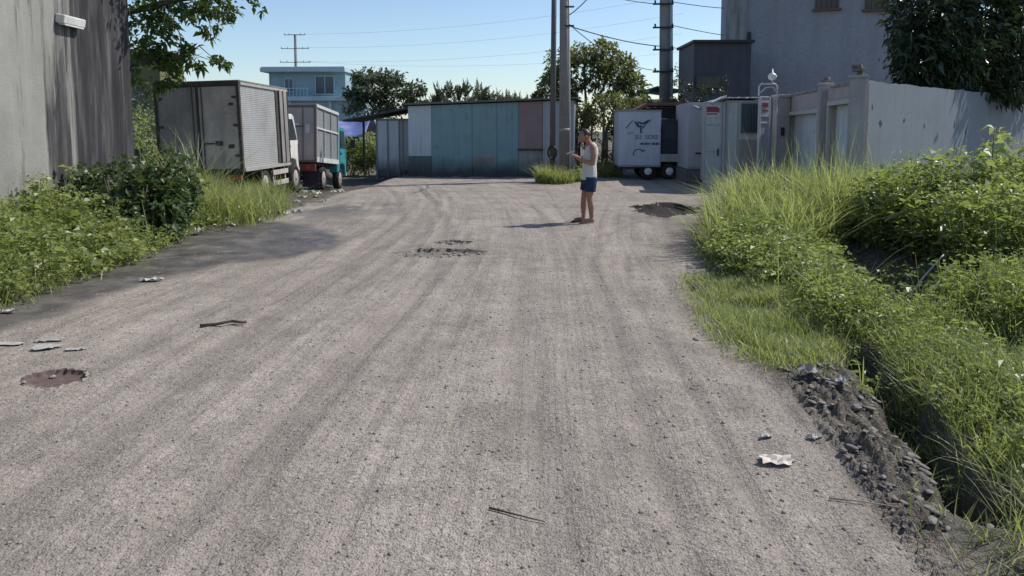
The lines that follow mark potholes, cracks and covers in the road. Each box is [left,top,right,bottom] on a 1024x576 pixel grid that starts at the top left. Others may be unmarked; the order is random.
pothole [391,247,491,258]
pothole [627,202,705,218]
